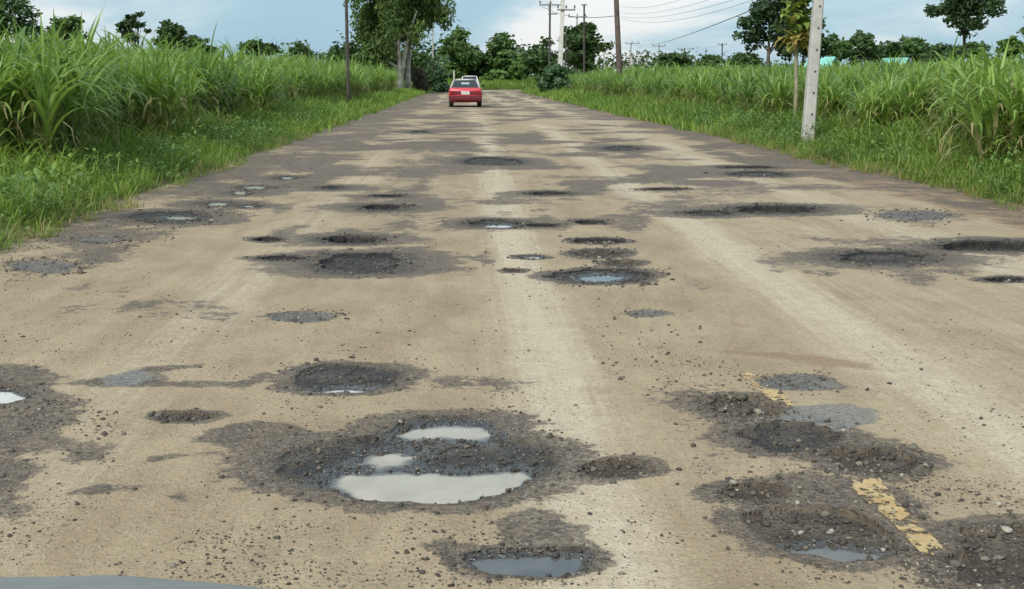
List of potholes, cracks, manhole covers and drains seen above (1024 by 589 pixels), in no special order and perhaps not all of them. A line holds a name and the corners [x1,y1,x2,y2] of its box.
pothole [469,219,522,228]
pothole [819,446,923,477]
pothole [0,383,32,404]
pothole [735,205,816,214]
pothole [707,393,782,418]
pothole [275,414,561,504]
pothole [320,235,380,244]
pothole [741,505,902,562]
pothole [735,419,842,453]
pothole [158,411,214,422]
pothole [578,457,658,478]
pothole [461,546,597,577]
